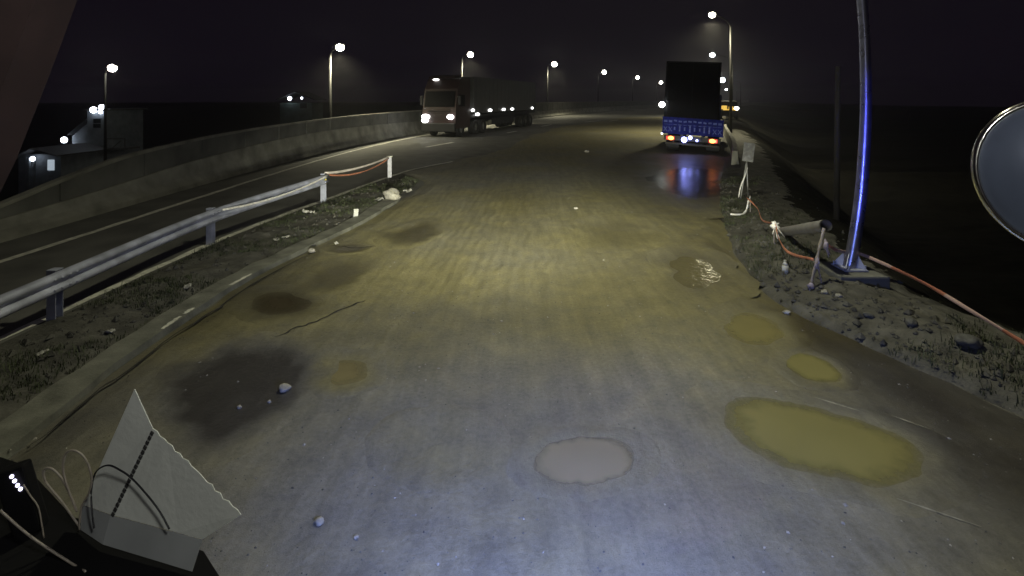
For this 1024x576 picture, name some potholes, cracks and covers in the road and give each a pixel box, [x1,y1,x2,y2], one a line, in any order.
crack [275,301,364,337]
